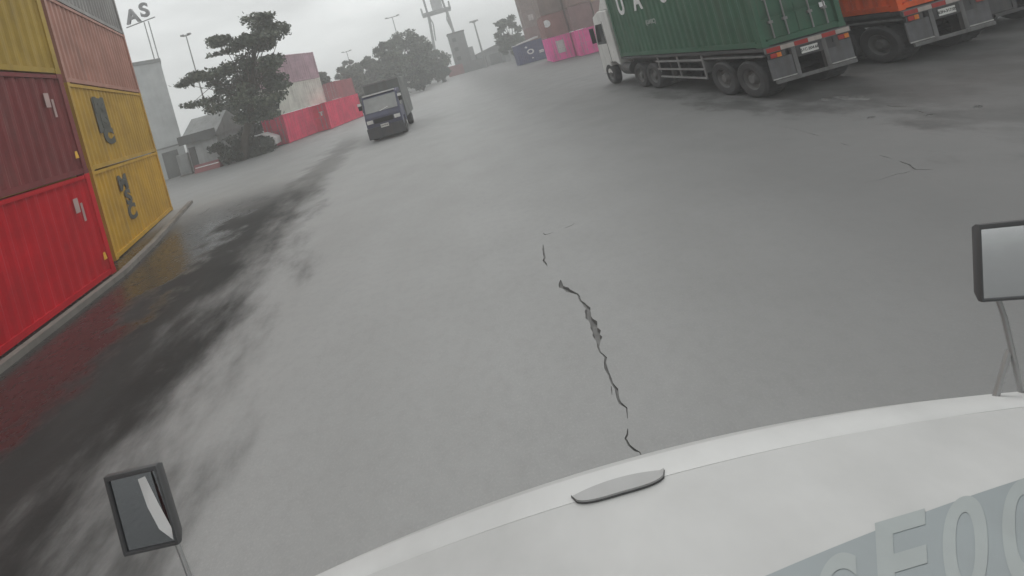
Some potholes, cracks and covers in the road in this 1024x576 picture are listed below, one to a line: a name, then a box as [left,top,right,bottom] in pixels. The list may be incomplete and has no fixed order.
crack [764,124,931,182]
crack [542,223,641,455]
